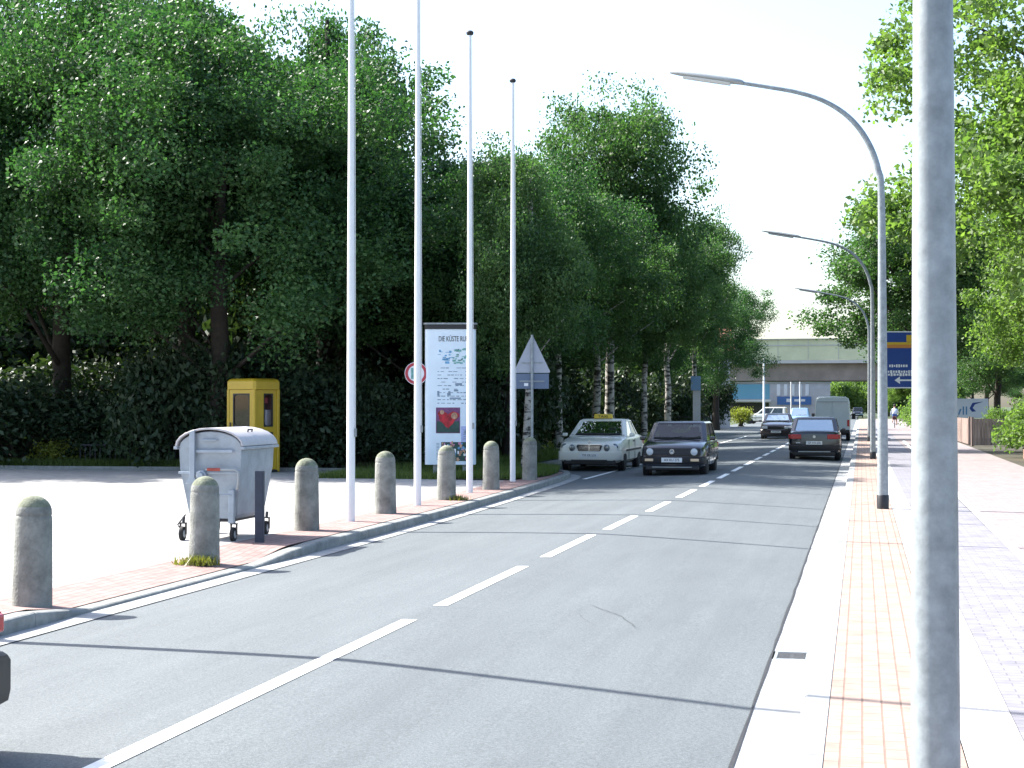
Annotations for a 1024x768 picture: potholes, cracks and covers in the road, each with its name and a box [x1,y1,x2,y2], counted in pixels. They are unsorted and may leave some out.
drain grate [773,651,810,660]
